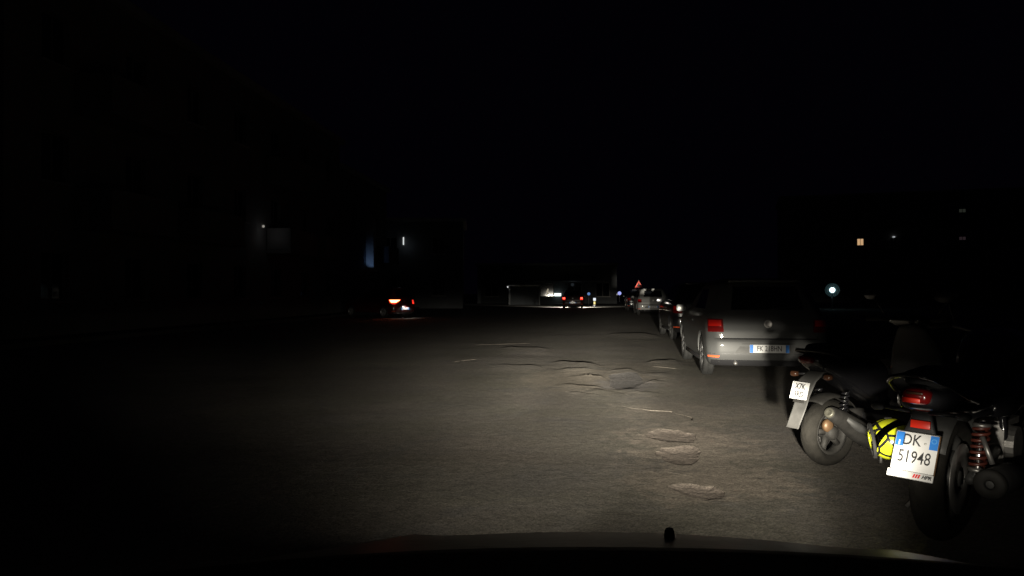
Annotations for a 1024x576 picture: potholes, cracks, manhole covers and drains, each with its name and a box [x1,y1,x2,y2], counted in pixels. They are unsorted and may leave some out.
pothole [645,429,697,443]
pothole [655,445,701,465]
crack [620,394,695,422]
pothole [609,372,644,389]
pothole [668,483,725,501]
